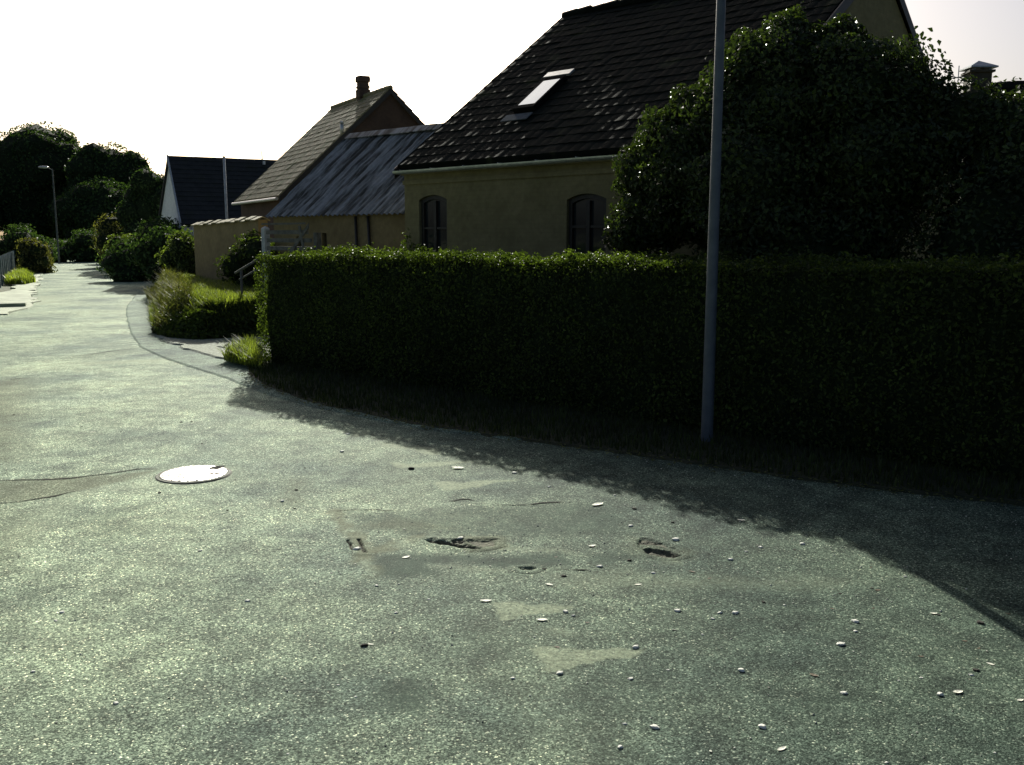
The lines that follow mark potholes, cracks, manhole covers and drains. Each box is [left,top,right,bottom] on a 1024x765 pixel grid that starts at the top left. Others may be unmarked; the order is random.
pothole [509,564,545,573]
manhole cover [155,465,232,484]
pothole [413,536,509,552]
pothole [626,535,694,561]
pothole [337,536,377,556]
